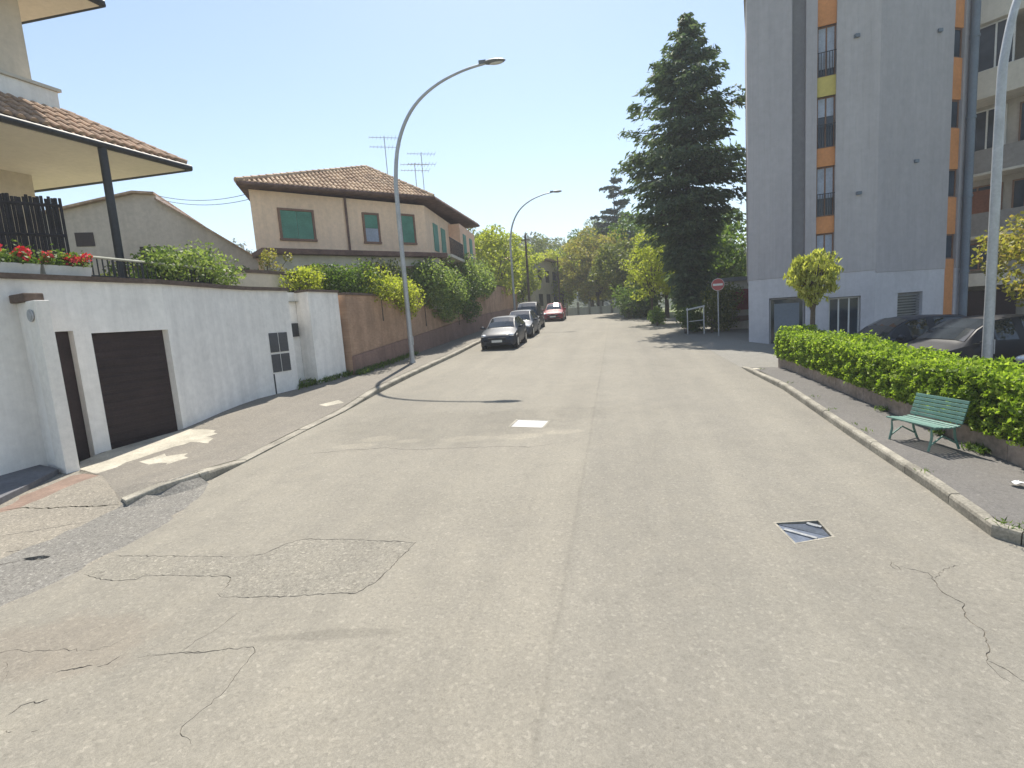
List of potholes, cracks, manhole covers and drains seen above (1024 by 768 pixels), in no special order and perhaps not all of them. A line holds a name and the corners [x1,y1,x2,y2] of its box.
crack [0,646,117,683]
manhole cover [773,519,835,544]
crack [143,615,255,744]
crack [890,562,1023,682]
